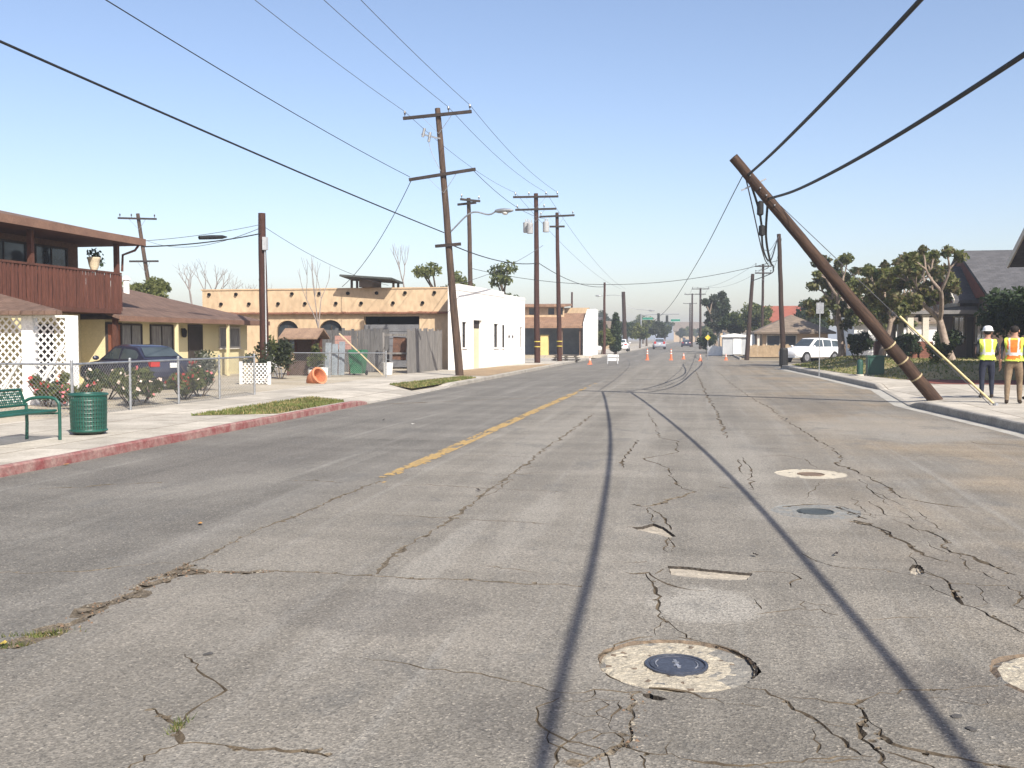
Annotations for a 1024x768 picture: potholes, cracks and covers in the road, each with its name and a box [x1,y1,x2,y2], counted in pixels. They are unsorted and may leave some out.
pothole [668,566,752,580]
pothole [909,564,924,575]
crack [696,372,728,438]
crack [0,415,592,768]
manhole cover [989,654,1024,693]
manhole cover [771,504,861,519]
pothole [632,523,675,538]
crack [361,414,1016,768]
manhole cover [598,640,758,693]
manhole cover [774,469,847,479]
